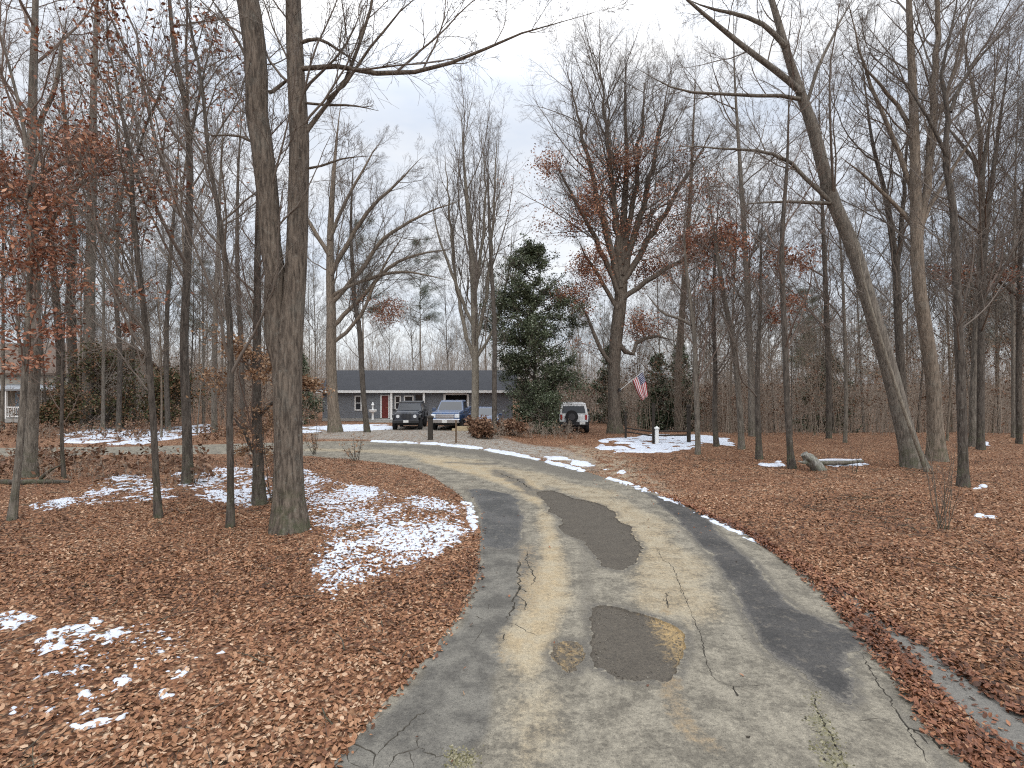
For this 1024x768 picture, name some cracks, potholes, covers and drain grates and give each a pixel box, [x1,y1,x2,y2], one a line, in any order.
crack [800,654,941,768]
crack [658,549,759,696]
crack [346,709,484,768]
crack [475,551,537,641]
